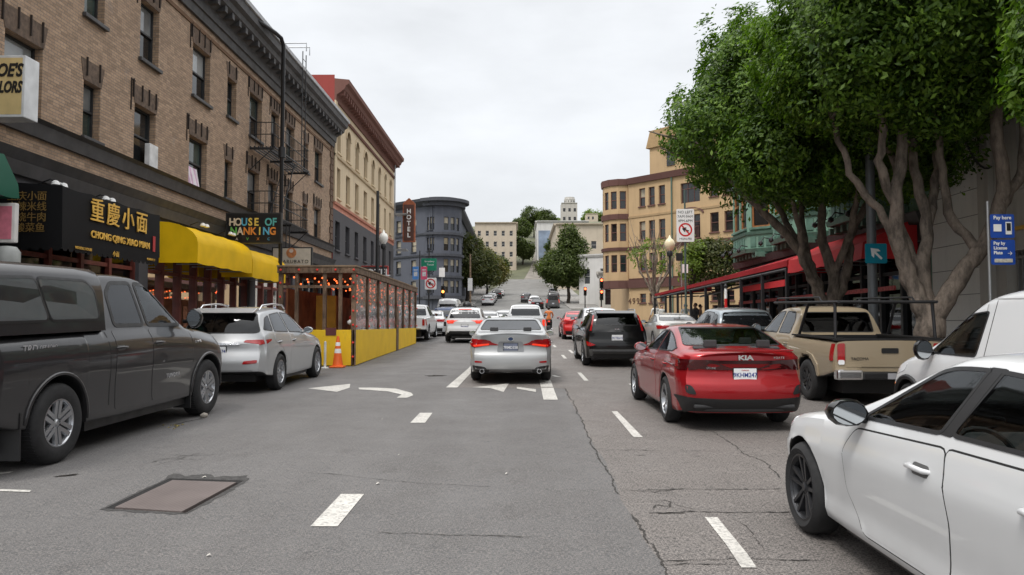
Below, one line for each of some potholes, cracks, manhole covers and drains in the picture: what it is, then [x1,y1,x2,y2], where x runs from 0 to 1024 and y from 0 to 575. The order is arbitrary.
manhole cover [99,473,249,514]
crack [600,431,807,566]
